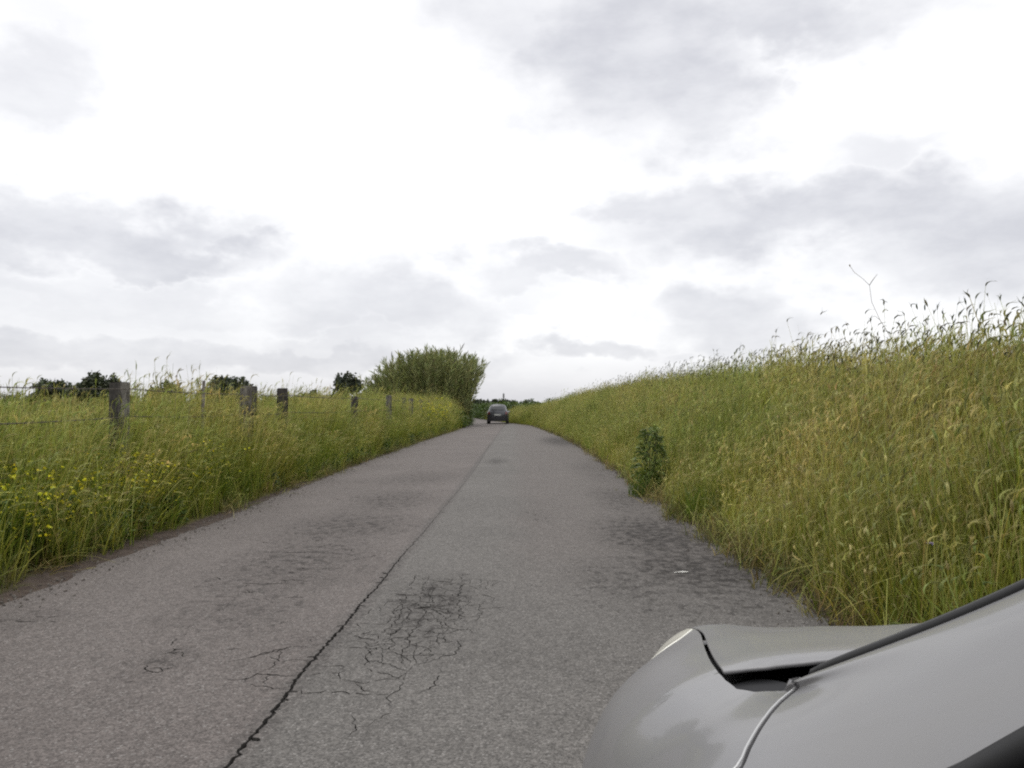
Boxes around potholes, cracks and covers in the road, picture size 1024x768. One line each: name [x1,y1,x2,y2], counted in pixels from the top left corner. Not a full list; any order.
crack [127,638,189,683]
crack [207,450,501,768]
